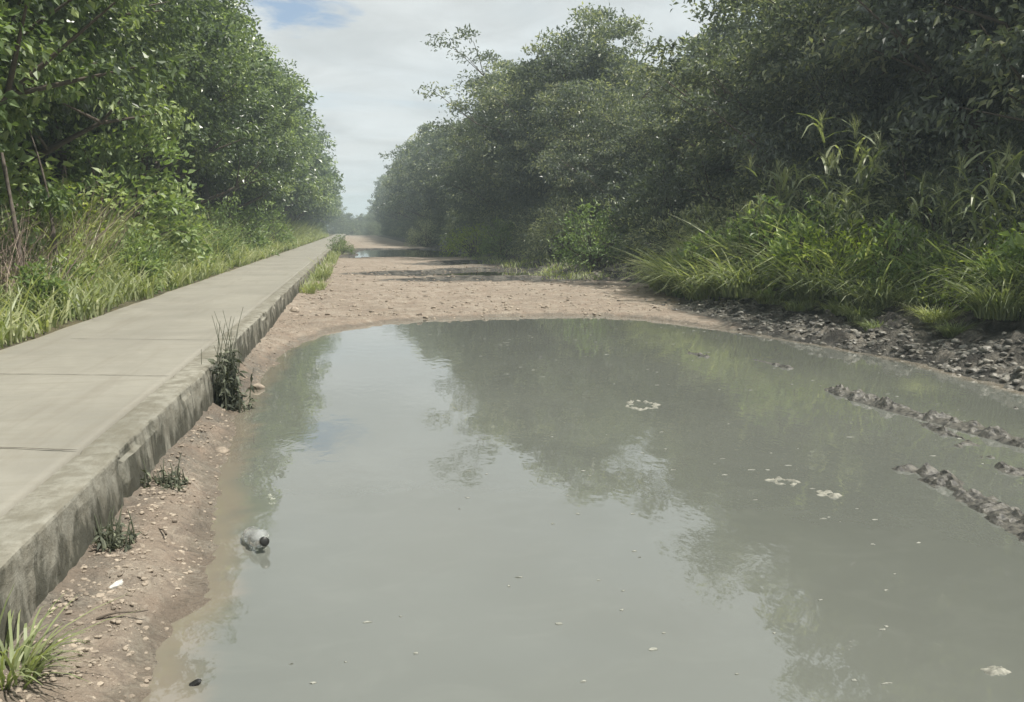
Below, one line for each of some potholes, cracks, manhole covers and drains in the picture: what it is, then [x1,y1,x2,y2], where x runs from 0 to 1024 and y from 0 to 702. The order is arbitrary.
pothole [347,248,468,258]
pothole [68,311,1024,702]
